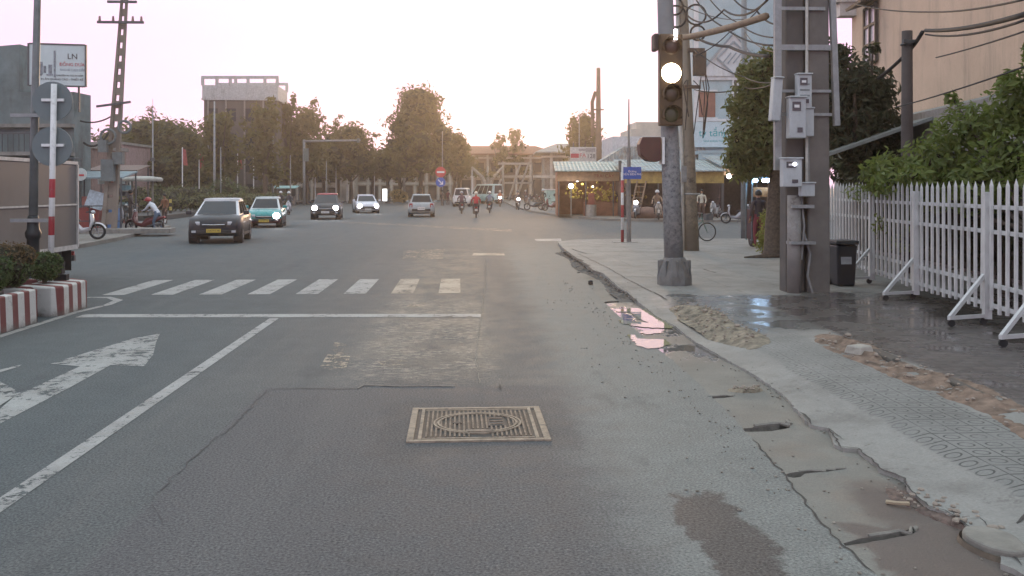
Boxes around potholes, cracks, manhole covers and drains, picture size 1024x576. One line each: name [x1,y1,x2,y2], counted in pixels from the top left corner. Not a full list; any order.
crack [752,438,874,572]
pothole [743,419,793,432]
crack [151,390,266,525]
